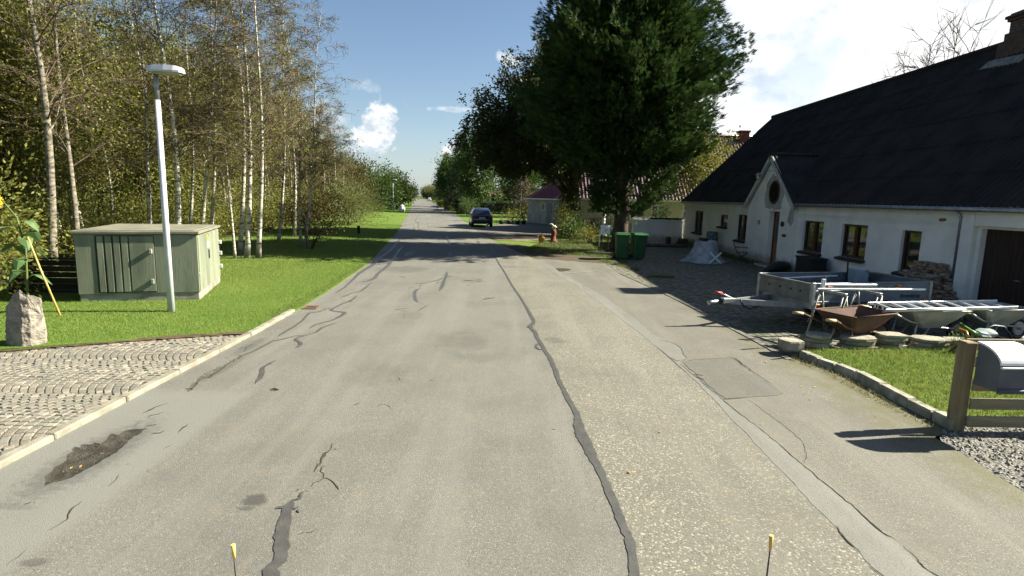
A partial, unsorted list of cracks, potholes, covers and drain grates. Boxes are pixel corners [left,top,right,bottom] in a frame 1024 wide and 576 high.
crack [9,463,149,563]
crack [295,443,339,492]
pothole [44,428,147,486]
